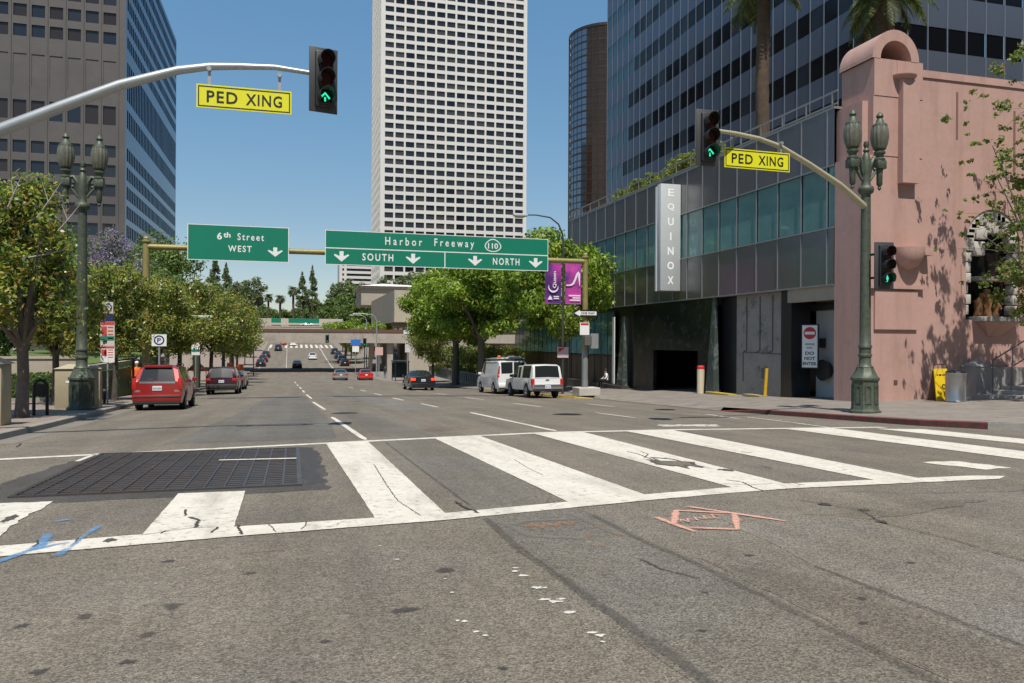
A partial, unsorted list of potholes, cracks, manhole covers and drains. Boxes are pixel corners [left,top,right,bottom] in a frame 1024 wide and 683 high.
crack [144,509,219,535]
drain grate [7,447,302,499]
